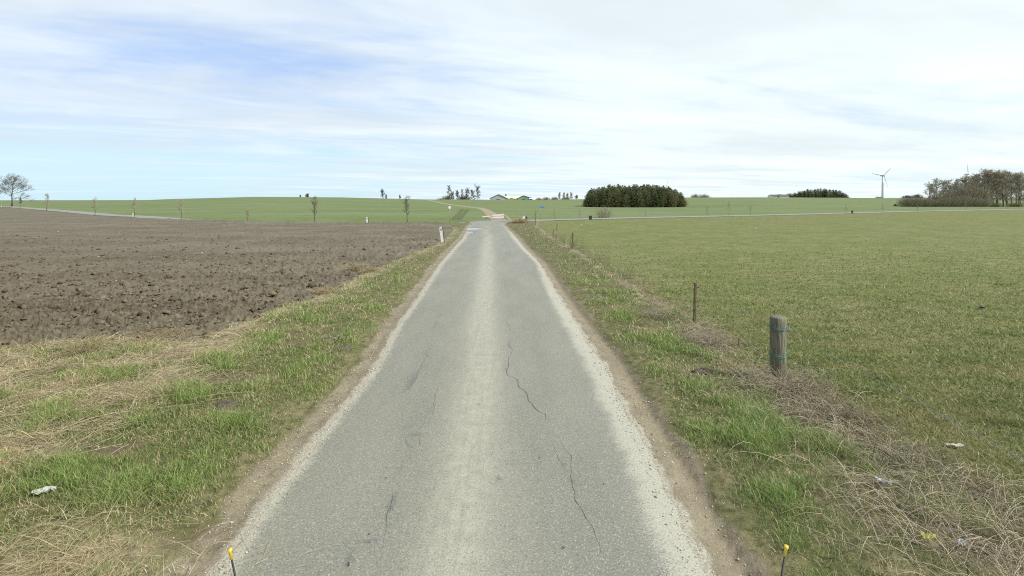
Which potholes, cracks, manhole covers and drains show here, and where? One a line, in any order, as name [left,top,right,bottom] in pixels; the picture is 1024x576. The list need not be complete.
crack [364,351,442,555]
crack [506,316,601,553]
